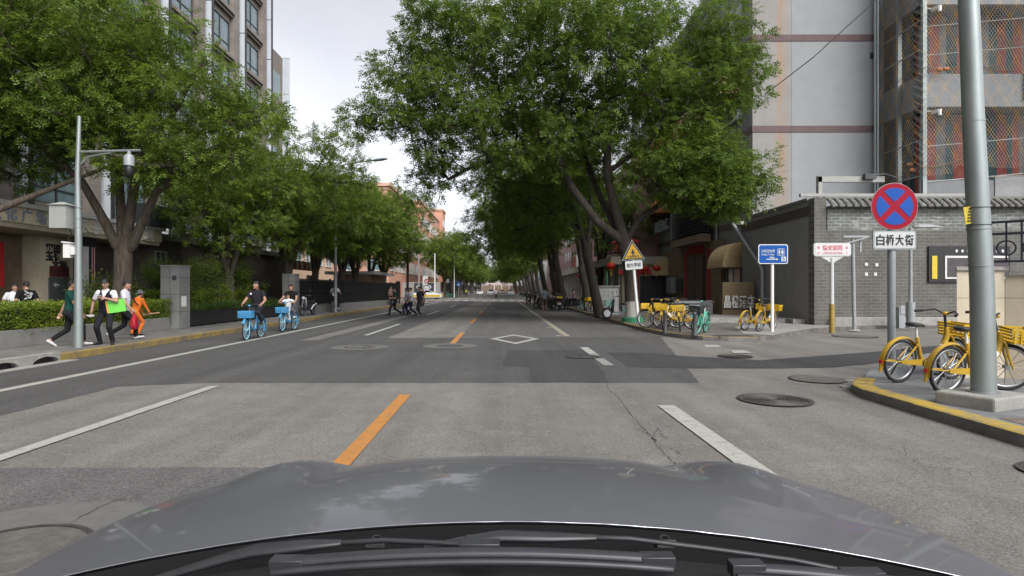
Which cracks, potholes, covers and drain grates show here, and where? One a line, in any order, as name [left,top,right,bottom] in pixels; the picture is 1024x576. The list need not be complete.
manhole cover [0,501,150,576]
manhole cover [737,393,815,407]
crack [607,386,683,463]
manhole cover [788,375,848,383]
